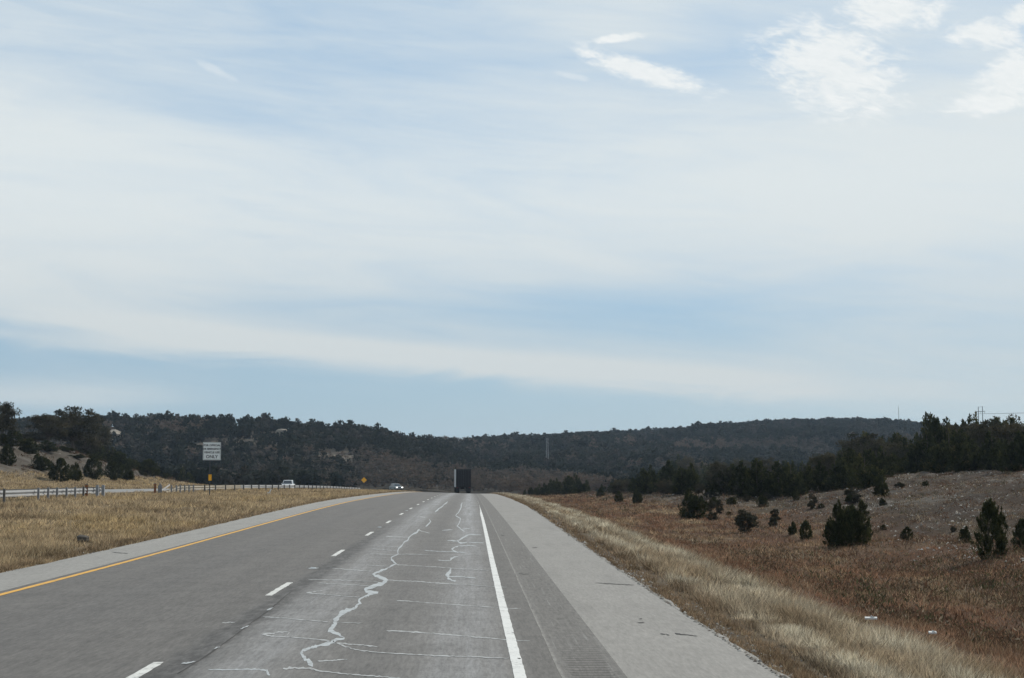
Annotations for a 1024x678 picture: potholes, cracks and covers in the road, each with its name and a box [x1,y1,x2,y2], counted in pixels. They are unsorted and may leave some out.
crack [178,502,529,678]
